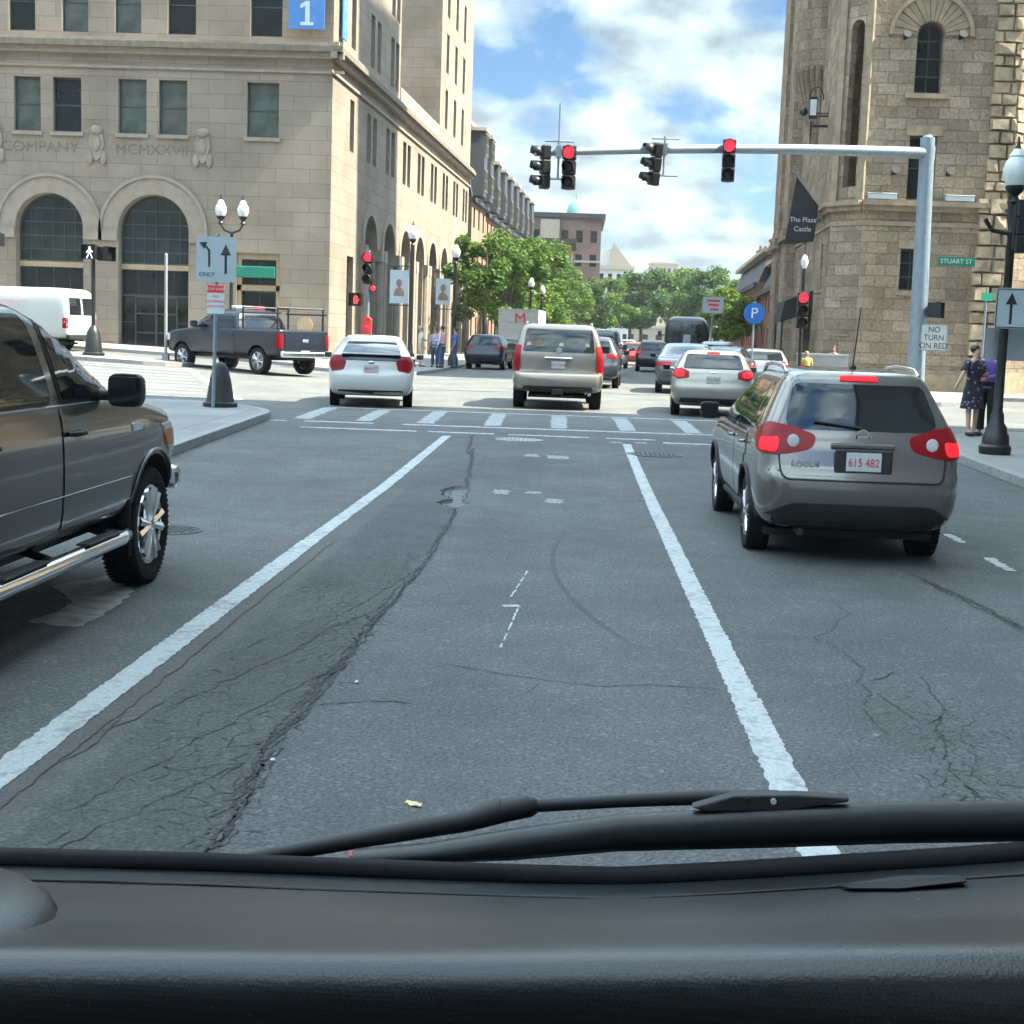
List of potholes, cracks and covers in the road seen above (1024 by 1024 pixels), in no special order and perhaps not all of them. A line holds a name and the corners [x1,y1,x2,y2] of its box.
crack [814,598,917,736]
crack [0,515,448,849]
crack [444,663,714,691]
manhole cover [167,525,203,535]
pothole [436,486,473,508]
crack [870,671,1022,843]
